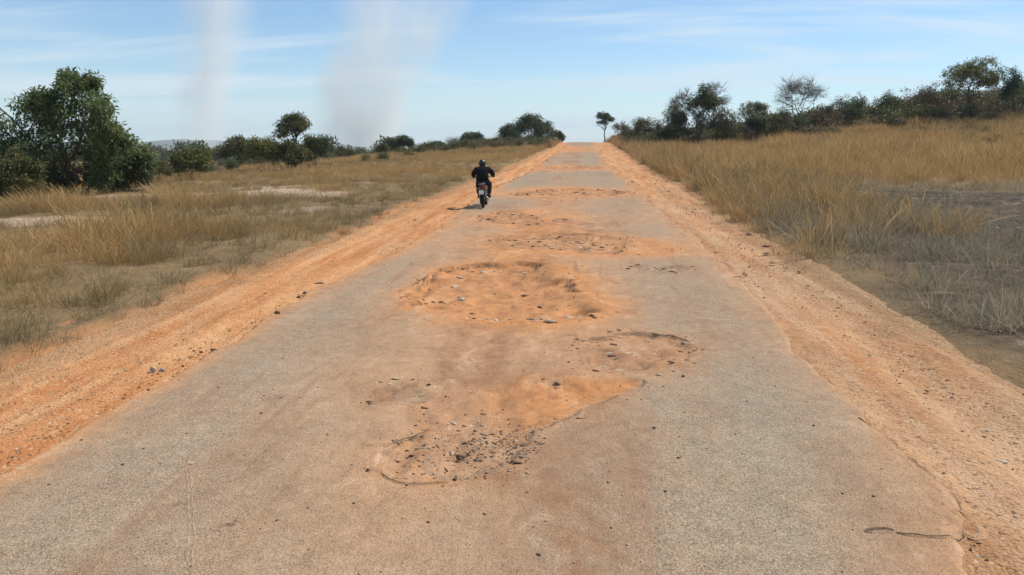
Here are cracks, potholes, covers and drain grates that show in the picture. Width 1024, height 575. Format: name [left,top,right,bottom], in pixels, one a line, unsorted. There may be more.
pothole [502,188,636,197]
pothole [572,331,702,374]
pothole [397,261,613,324]
crack [858,417,968,545]
pothole [473,211,547,226]
pothole [484,232,635,256]
pothole [421,373,651,481]
pothole [369,430,436,479]
pothole [372,379,441,409]
